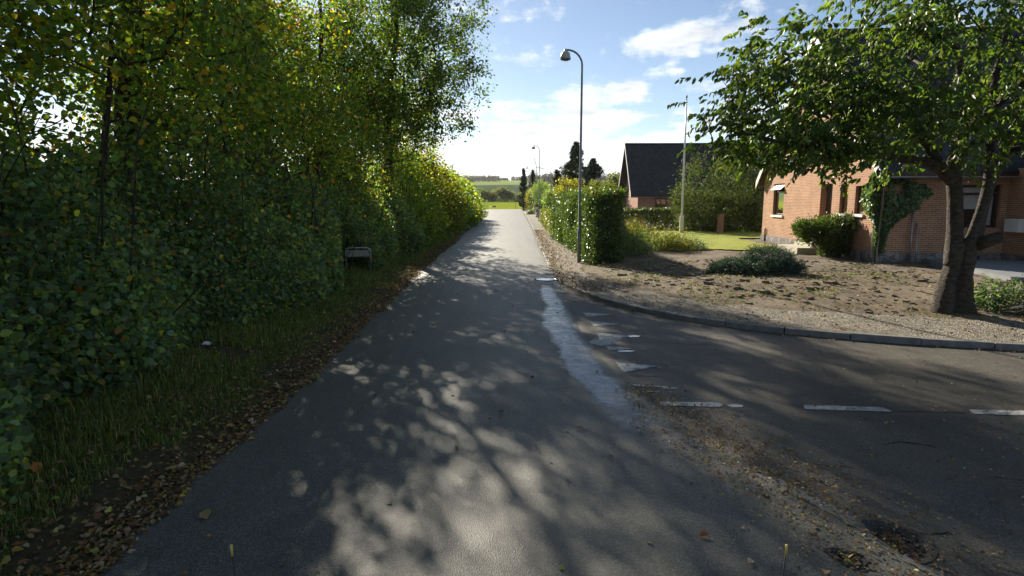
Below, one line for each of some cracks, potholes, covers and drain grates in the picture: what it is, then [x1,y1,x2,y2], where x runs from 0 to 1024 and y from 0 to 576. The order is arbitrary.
pothole [861,519,939,564]
pothole [823,547,876,571]
